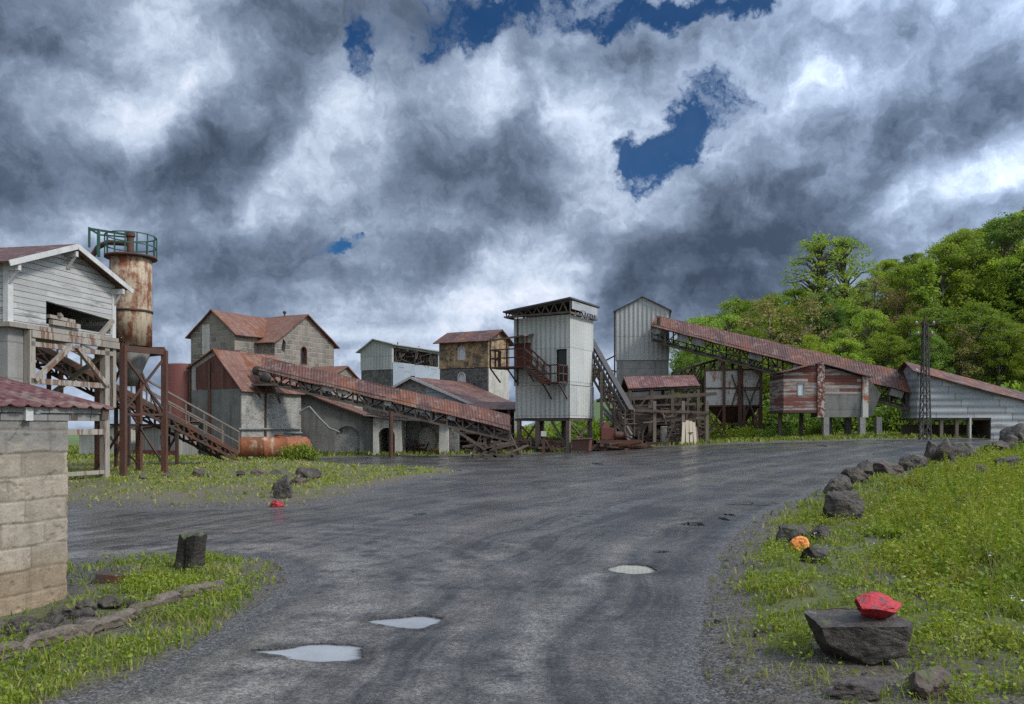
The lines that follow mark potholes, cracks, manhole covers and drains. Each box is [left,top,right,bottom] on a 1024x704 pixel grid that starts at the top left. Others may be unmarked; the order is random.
pothole [249,643,364,662]
pothole [606,564,657,574]
pothole [366,614,443,629]
